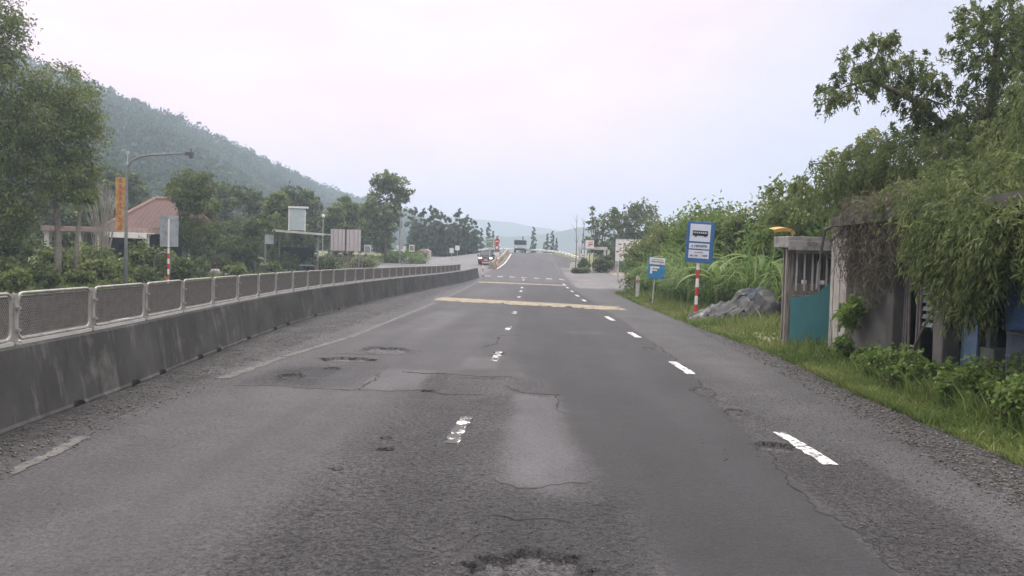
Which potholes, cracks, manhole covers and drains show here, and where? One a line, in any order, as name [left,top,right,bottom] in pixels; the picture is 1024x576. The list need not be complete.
pothole [355,346,419,355]
pothole [448,543,615,576]
crack [500,515,574,524]
crack [354,372,566,414]
pothole [751,440,797,454]
pothole [722,408,754,416]
